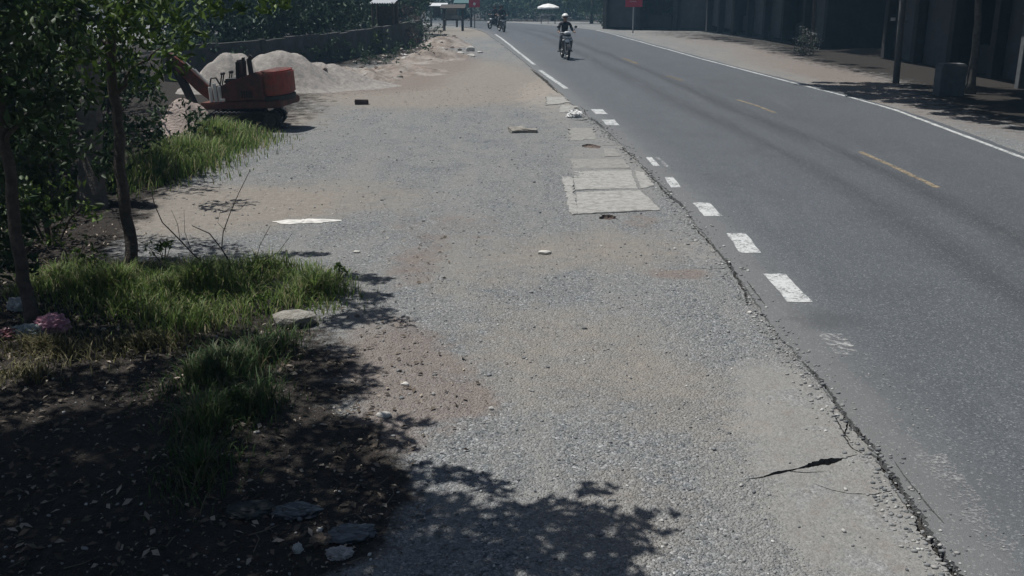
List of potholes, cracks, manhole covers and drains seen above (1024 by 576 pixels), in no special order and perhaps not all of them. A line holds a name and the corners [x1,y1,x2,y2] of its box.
crack [745,367,964,576]
